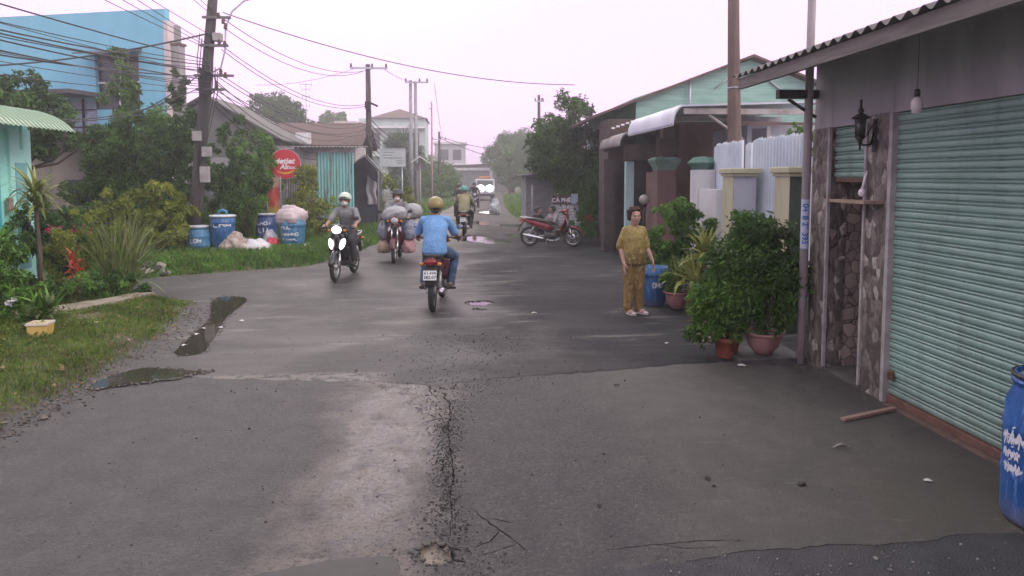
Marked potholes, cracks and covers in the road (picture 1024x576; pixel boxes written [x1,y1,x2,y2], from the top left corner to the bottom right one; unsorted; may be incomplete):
crack [605,534,978,562]
pothole [408,539,453,566]
crack [397,388,530,563]
